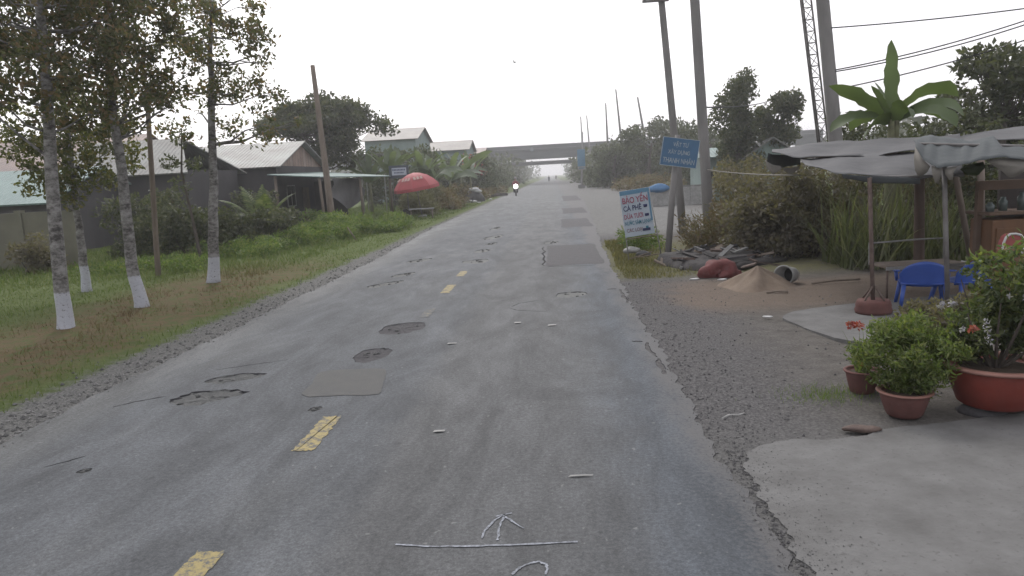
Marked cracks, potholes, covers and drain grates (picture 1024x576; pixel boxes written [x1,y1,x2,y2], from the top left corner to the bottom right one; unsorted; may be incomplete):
pothole [205,373,267,384]
pothole [169,389,251,407]
pothole [367,280,404,288]
pothole [352,348,393,363]
pothole [378,322,426,335]
